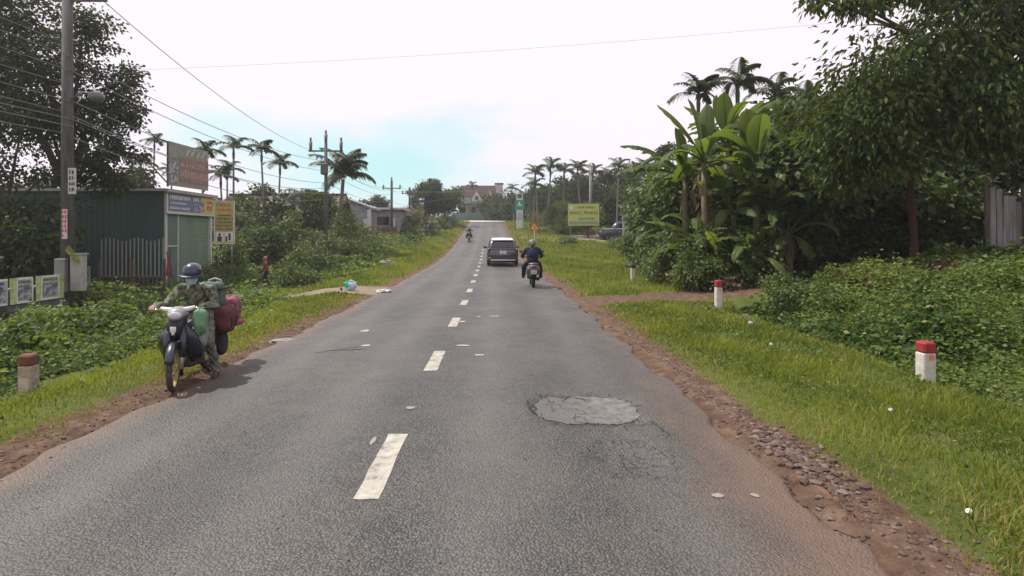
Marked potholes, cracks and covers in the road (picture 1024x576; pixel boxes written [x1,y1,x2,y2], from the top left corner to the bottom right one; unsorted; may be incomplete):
crack [526,393,683,479]
